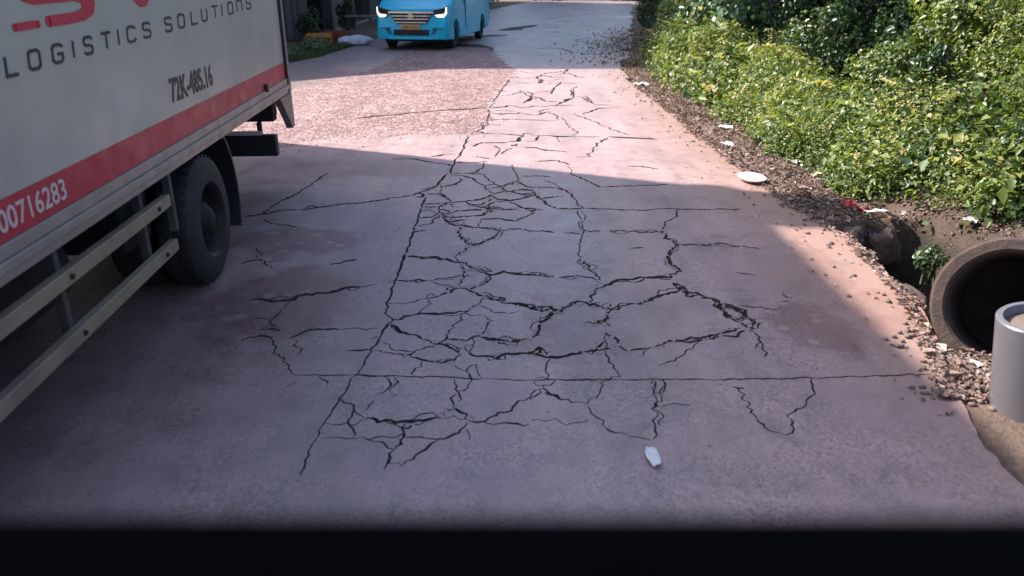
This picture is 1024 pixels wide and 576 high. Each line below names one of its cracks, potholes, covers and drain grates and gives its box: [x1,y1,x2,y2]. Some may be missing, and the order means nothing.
crack [241,9,931,476]
